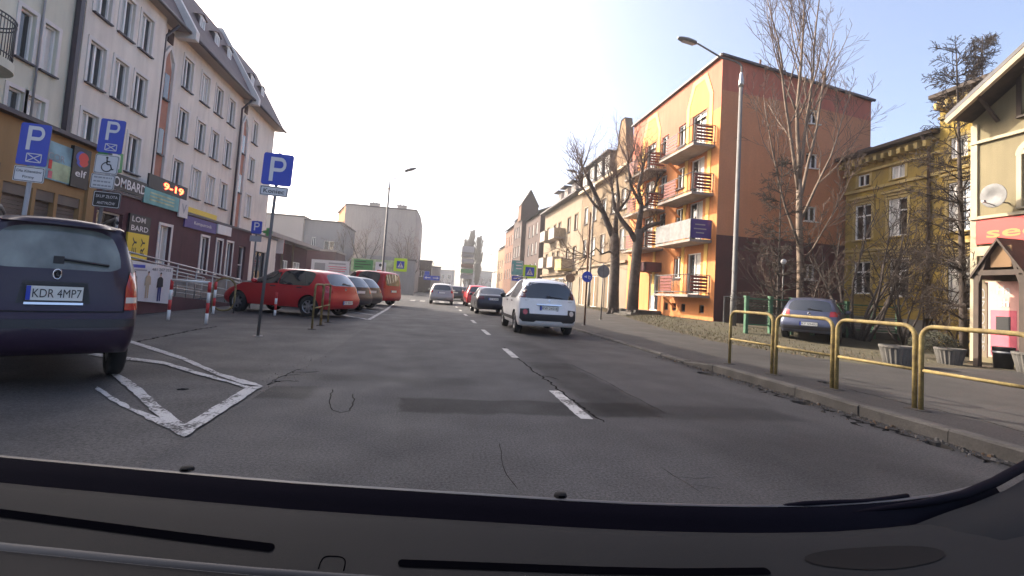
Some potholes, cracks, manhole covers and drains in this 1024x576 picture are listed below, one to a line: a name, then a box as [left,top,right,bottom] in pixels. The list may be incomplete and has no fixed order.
crack [329,390,355,413]
